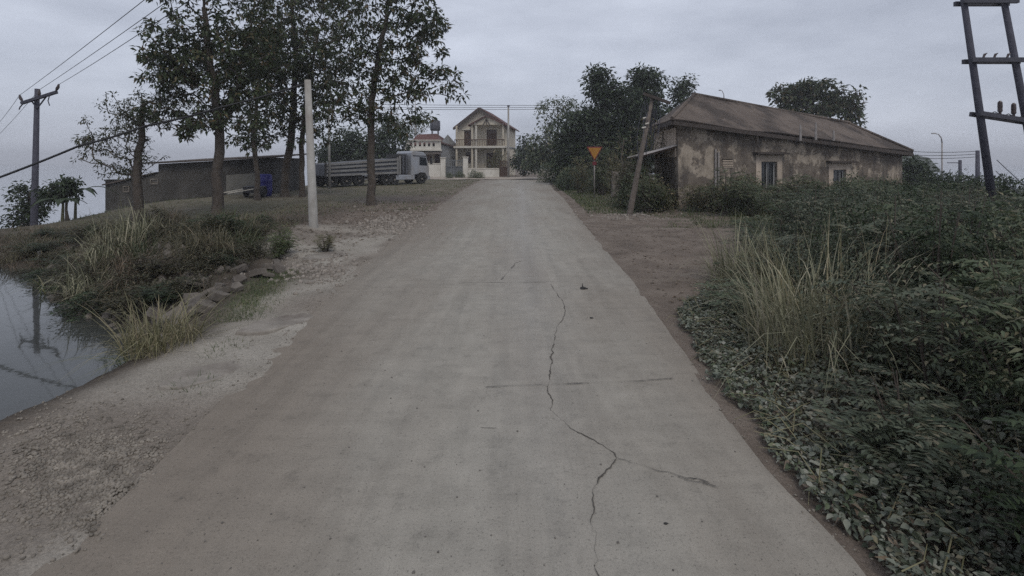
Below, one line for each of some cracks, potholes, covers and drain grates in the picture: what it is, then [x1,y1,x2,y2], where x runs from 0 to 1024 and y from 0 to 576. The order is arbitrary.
crack [471,261,715,576]
